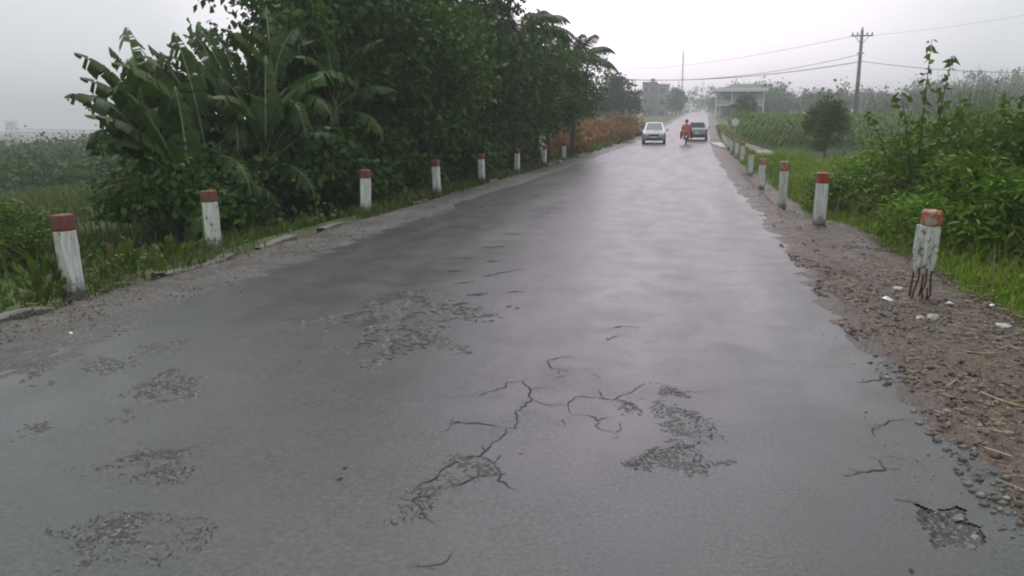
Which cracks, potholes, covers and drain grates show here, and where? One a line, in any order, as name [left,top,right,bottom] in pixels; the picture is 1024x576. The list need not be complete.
pothole [896,499,987,551]
crack [365,356,737,529]
crack [844,456,904,476]
